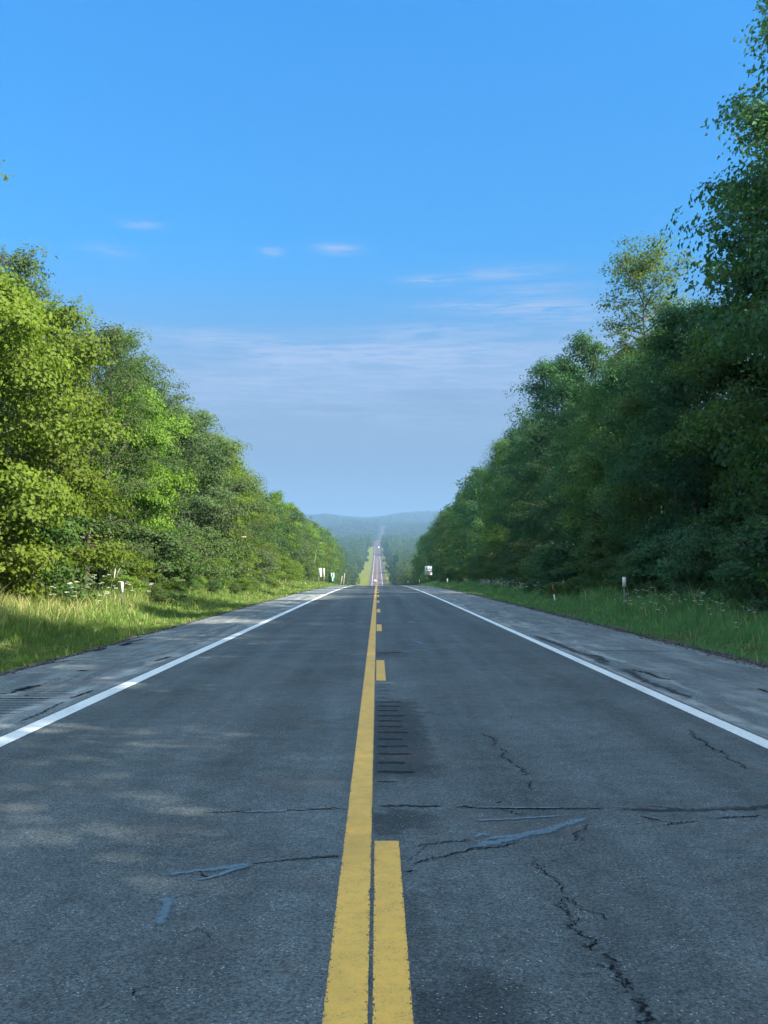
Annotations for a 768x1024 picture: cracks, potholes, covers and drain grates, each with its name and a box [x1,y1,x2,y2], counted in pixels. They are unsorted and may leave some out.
crack [689,730,746,769]
crack [481,733,535,790]
crack [530,857,657,1024]
crack [625,669,768,693]
